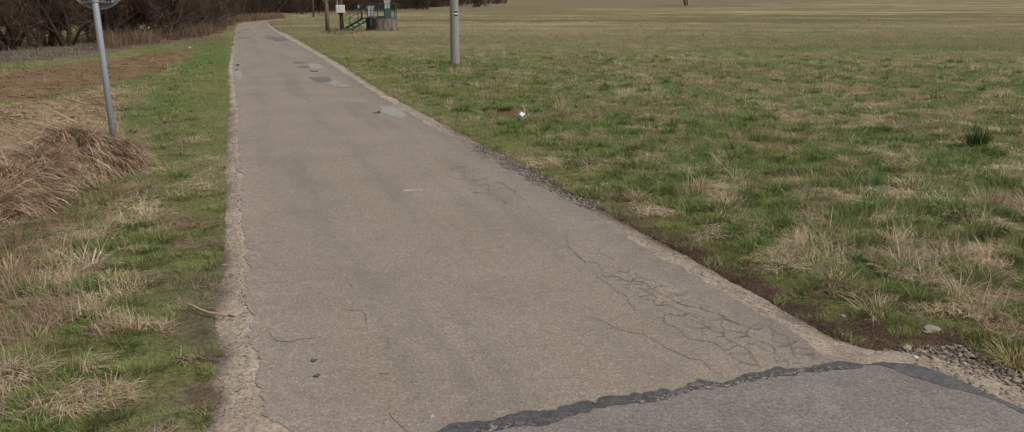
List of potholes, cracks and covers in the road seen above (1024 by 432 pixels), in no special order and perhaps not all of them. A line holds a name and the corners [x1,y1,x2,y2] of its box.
crack [567,233,813,373]
crack [430,154,530,208]
